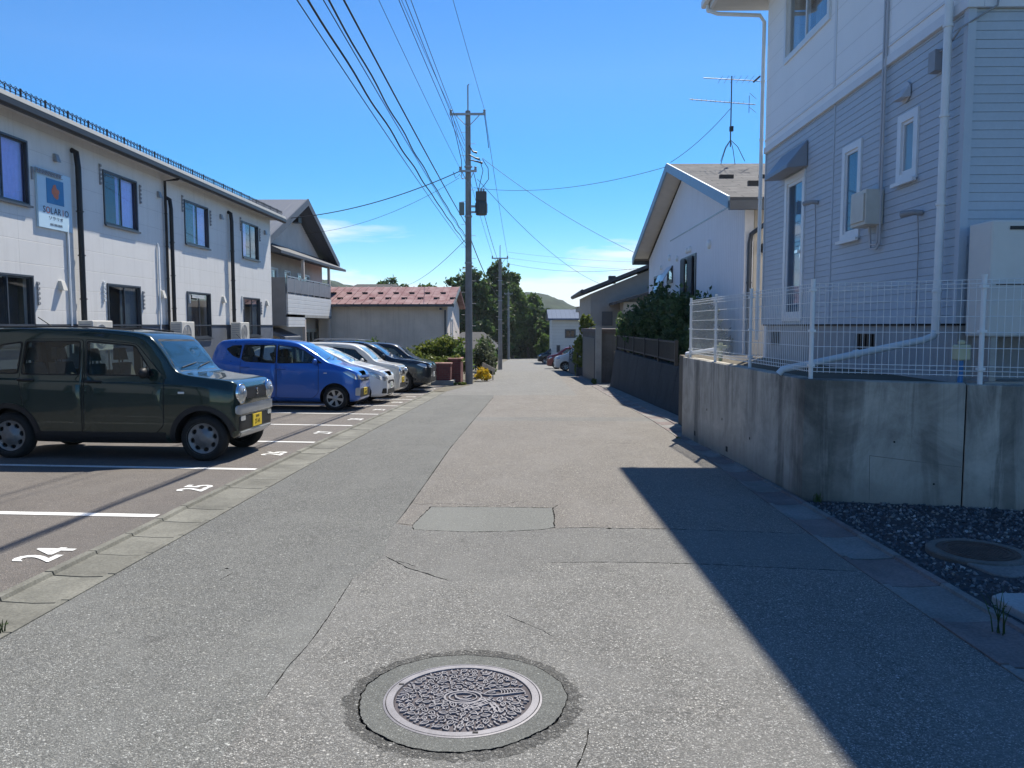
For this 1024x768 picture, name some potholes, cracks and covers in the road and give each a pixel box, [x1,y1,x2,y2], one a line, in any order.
manhole cover [383,664,542,738]
crack [387,557,446,580]
manhole cover [925,538,1024,578]
